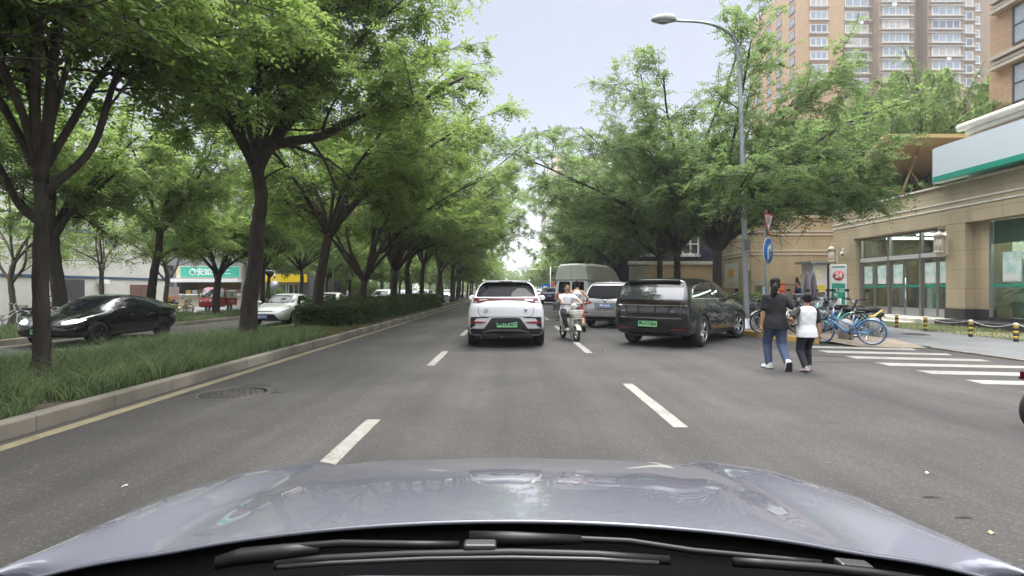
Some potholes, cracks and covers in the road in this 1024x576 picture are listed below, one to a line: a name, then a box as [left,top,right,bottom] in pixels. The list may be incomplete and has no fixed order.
manhole cover [194,386,271,400]
